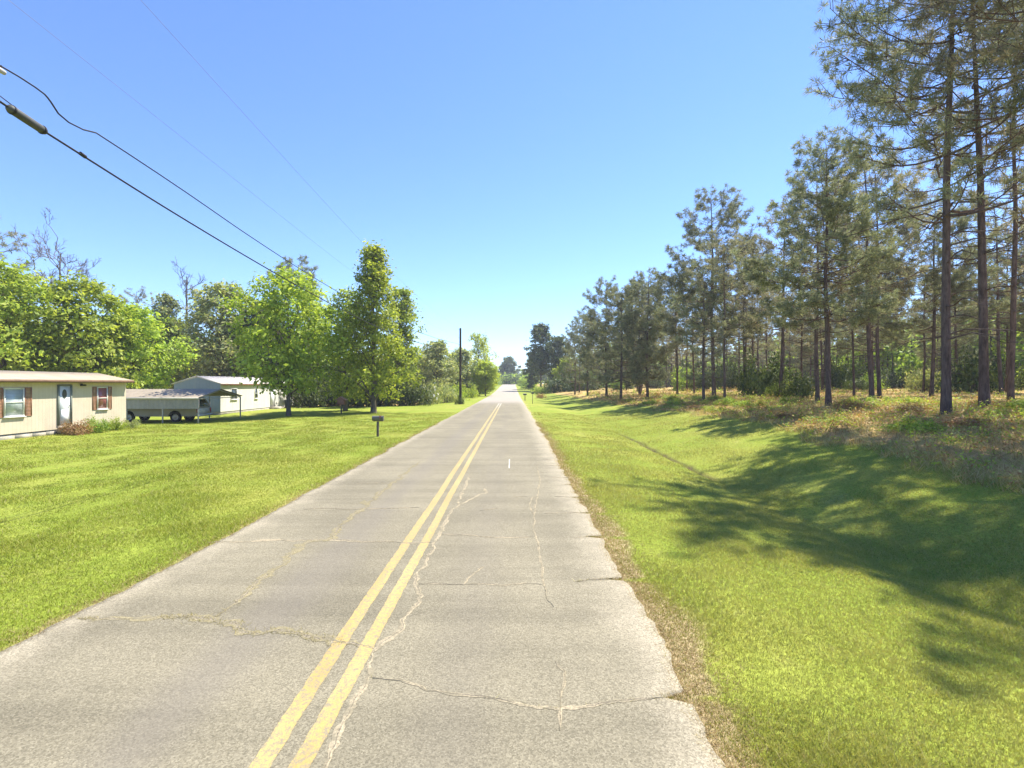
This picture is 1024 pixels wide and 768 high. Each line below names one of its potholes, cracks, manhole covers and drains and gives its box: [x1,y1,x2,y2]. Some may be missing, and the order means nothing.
crack [77,461,665,768]
